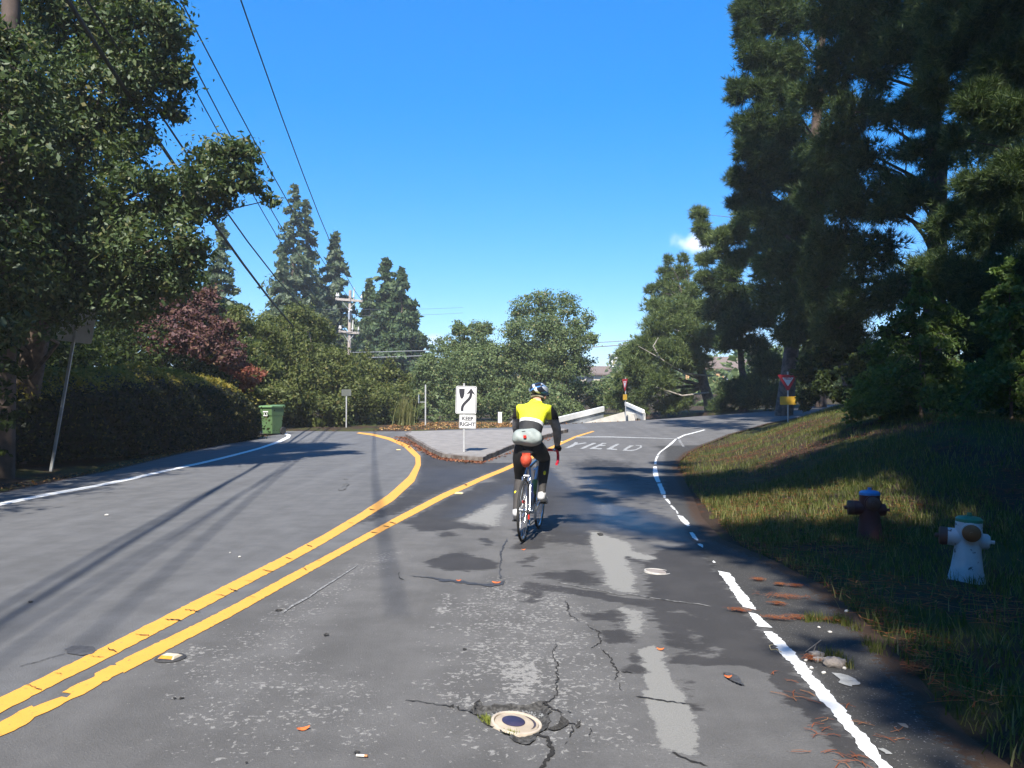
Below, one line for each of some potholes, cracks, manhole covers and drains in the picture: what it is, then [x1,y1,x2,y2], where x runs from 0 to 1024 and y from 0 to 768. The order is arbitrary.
manhole cover [490,711,542,737]
crack [398,539,507,587]
crack [566,603,691,704]
crack [405,699,480,710]
crack [533,640,592,768]
pothole [468,701,553,745]
